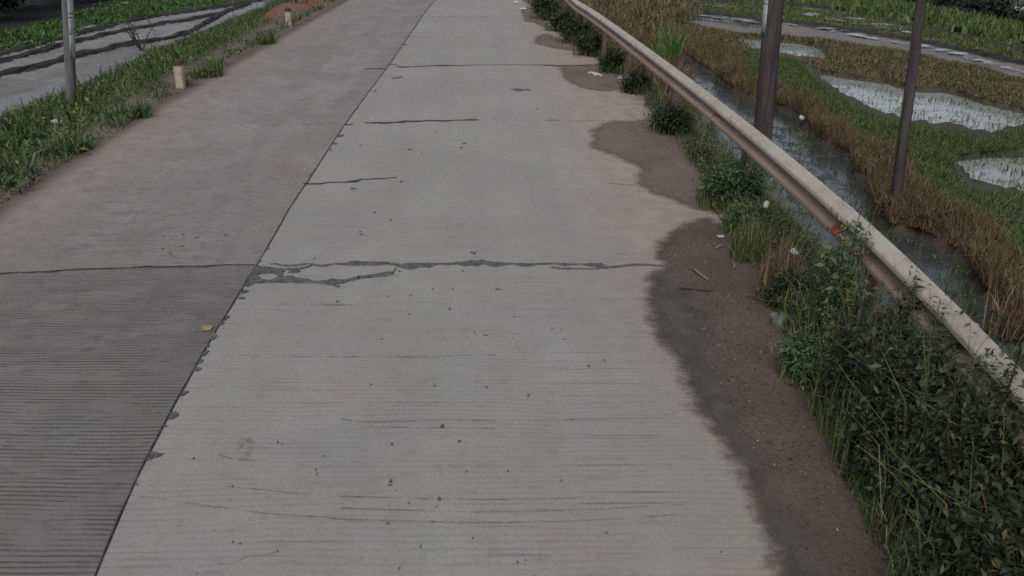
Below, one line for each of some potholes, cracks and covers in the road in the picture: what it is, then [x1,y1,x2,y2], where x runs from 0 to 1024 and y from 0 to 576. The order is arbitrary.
crack [303,177,397,185]
